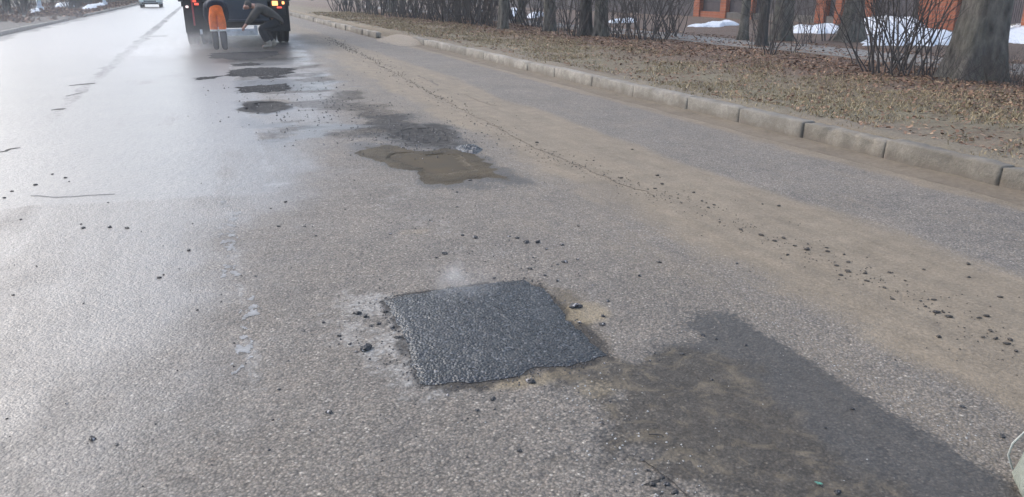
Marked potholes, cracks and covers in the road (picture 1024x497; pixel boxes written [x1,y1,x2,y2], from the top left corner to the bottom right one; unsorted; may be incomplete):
crack [372,62,654,196]
pothole [368,148,495,182]
pothole [246,100,285,113]
